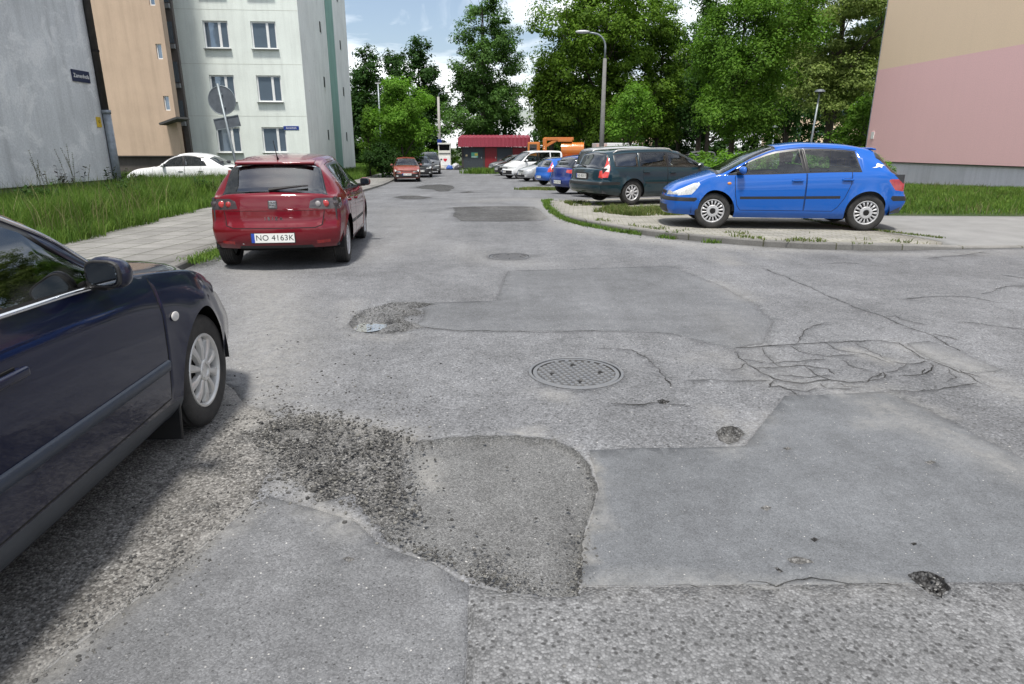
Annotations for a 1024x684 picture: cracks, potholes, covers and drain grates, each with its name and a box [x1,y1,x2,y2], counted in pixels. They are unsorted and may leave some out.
pothole [348,302,432,334]
pothole [246,415,427,531]
crack [769,270,960,351]
manhole cover [529,357,624,389]
pothole [908,571,951,598]
pothole [716,426,745,444]
crack [708,323,982,395]
